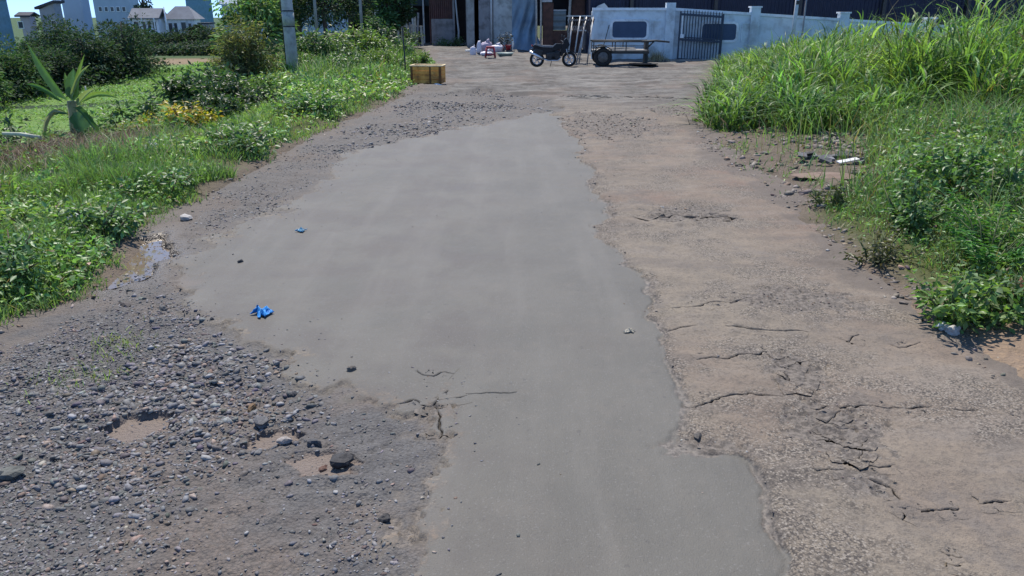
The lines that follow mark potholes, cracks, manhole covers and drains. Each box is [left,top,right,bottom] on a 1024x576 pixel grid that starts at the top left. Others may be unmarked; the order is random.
pothole [229,424,313,452]
pothole [83,406,188,448]
crack [658,295,1020,527]
pothole [271,445,371,481]
pothole [92,229,187,297]
crack [396,366,520,439]
